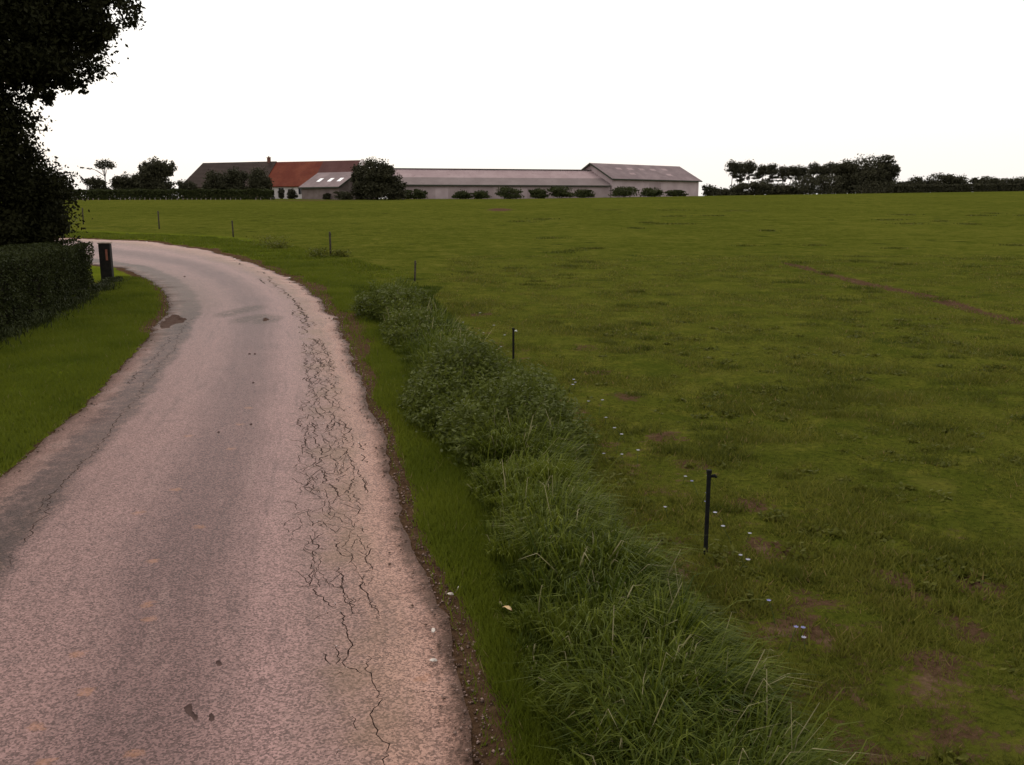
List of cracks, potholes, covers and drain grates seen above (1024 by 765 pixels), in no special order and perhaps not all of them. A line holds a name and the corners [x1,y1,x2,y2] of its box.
crack [284,303,390,765]
pothole [159,314,187,329]
pothole [184,704,198,721]
